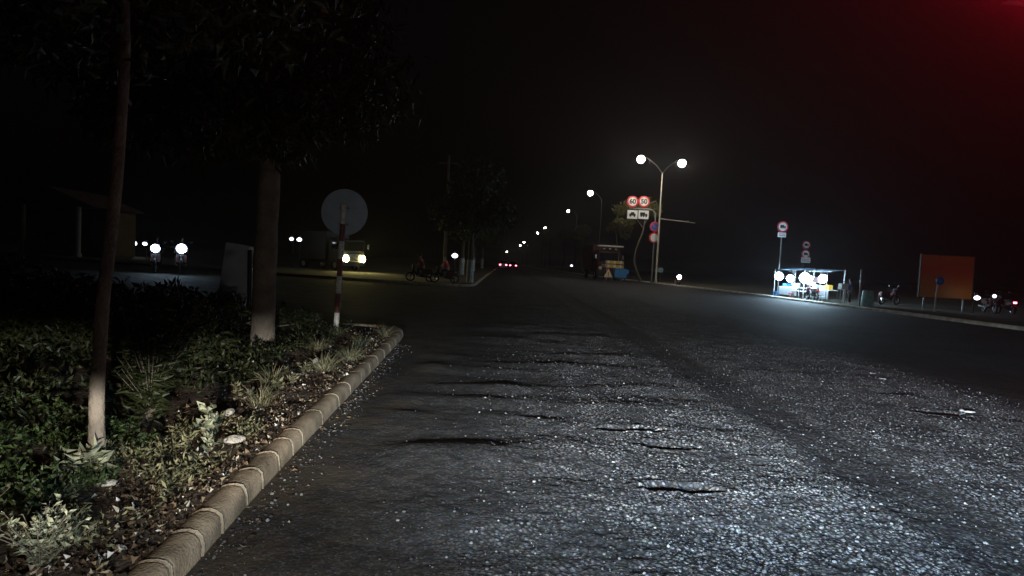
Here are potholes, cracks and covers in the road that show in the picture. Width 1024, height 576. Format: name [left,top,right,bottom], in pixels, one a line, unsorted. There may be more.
pothole [622,480,740,495]
pothole [901,408,975,418]
pothole [581,423,686,434]
pothole [617,438,715,453]
